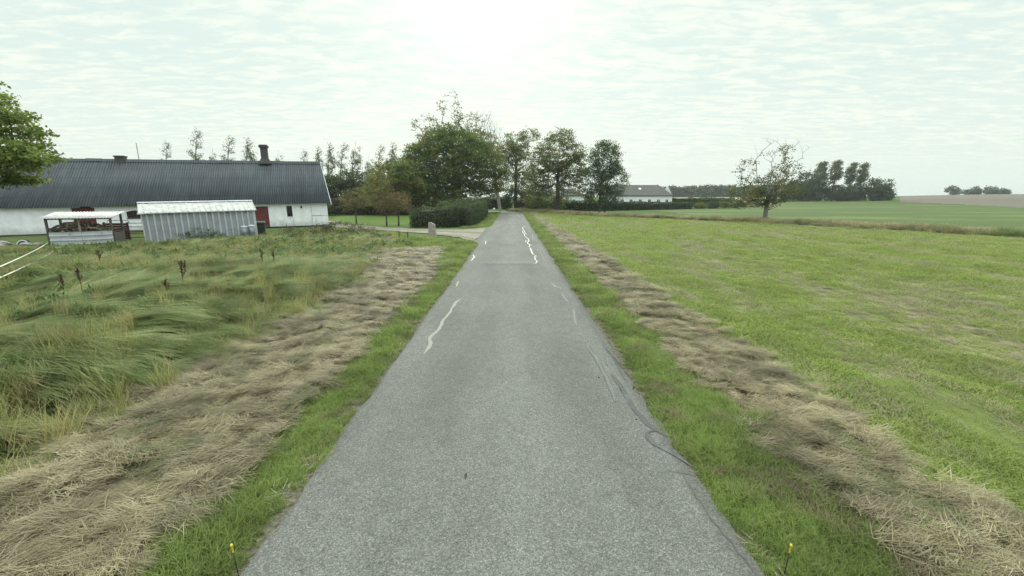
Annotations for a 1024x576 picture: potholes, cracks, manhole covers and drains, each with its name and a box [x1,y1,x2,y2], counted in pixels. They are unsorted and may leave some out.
crack [602,343,632,382]
